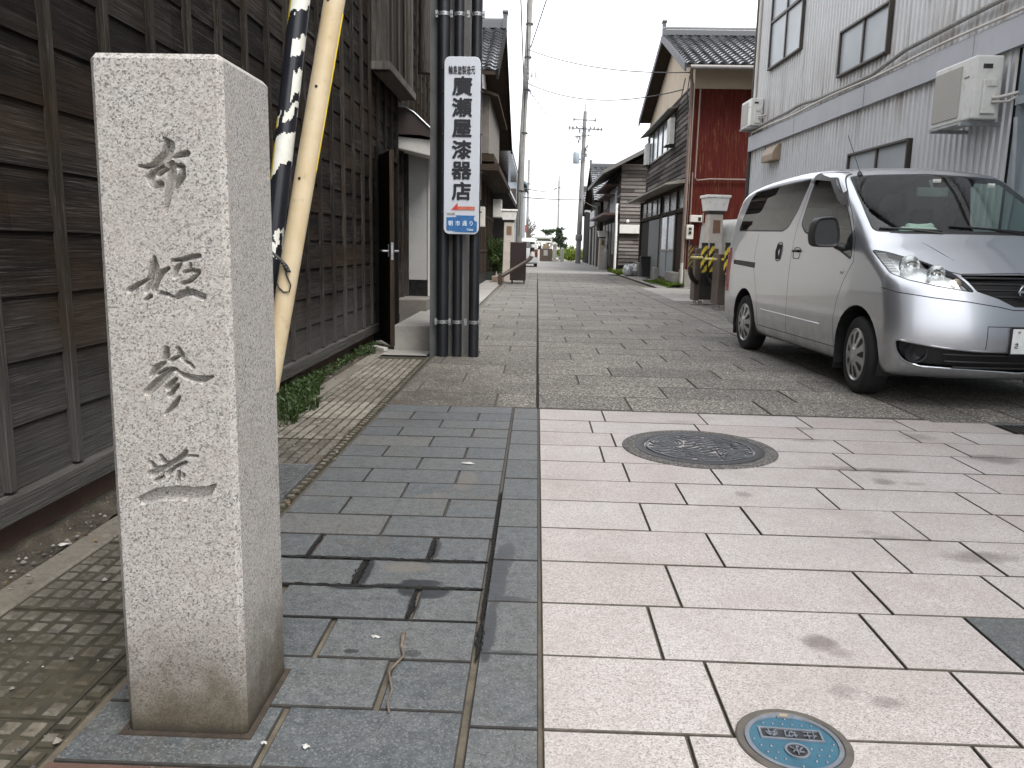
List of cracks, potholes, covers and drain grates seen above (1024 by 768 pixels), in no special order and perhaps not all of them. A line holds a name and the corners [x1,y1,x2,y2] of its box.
manhole cover [735,709,854,768]
manhole cover [622,430,779,471]
